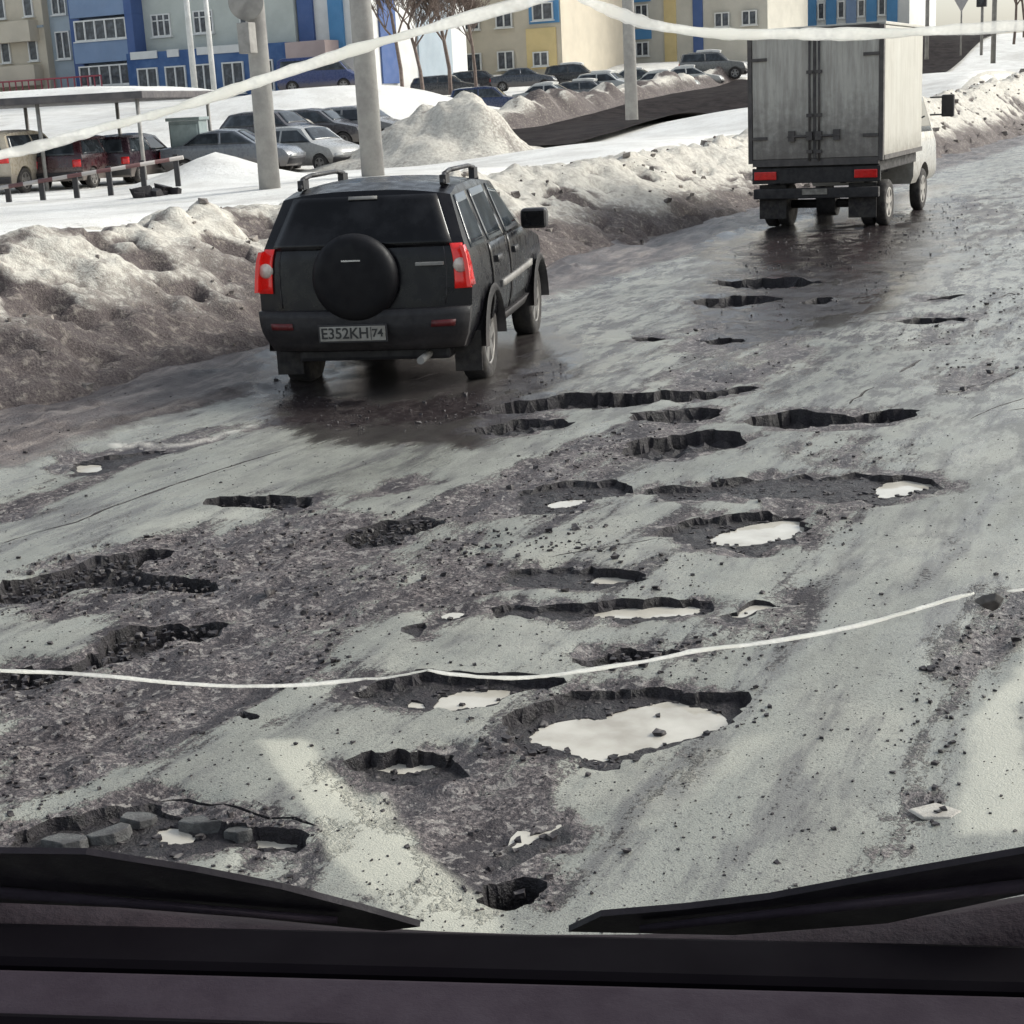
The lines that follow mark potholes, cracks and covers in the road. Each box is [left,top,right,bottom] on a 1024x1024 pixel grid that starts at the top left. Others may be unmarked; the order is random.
pothole [629,407,722,424]
crack [137,796,317,826]
pothole [203,495,314,511]
pothole [481,386,759,414]
pothole [471,419,575,437]
pothole [712,277,822,290]
pothole [343,748,470,786]
pothole [0,548,219,604]
pothole [353,668,567,712]
pothole [476,876,548,911]
pothole [342,517,446,549]
